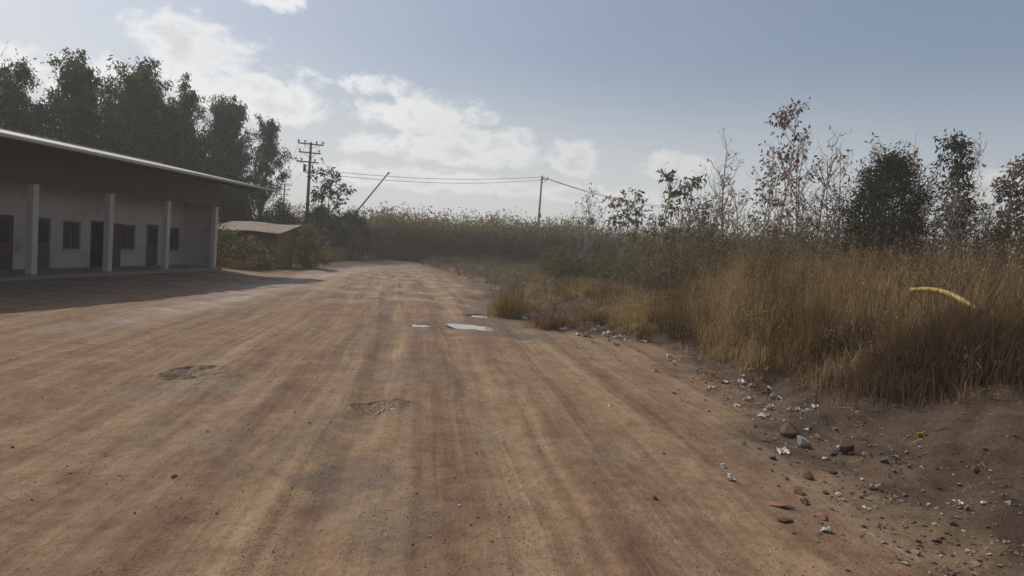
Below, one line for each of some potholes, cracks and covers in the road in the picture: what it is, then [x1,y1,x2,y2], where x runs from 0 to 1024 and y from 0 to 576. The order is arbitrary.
pothole [150,364,244,383]
pothole [342,397,424,419]
pothole [443,324,513,333]
